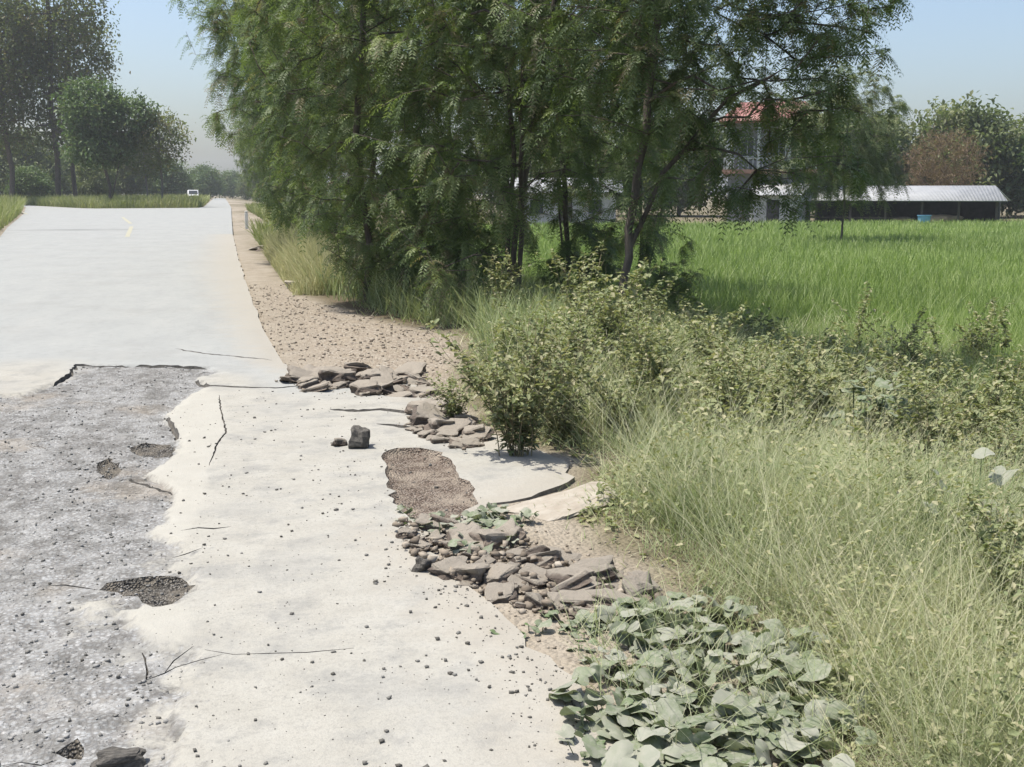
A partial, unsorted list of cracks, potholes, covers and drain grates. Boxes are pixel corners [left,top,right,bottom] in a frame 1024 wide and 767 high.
pothole [130,443,175,458]
crack [142,647,351,680]
pothole [96,459,122,479]
pothole [56,738,84,760]
pothole [100,576,195,607]
crack [330,408,411,428]
crack [53,349,297,466]
pothole [381,447,478,519]
